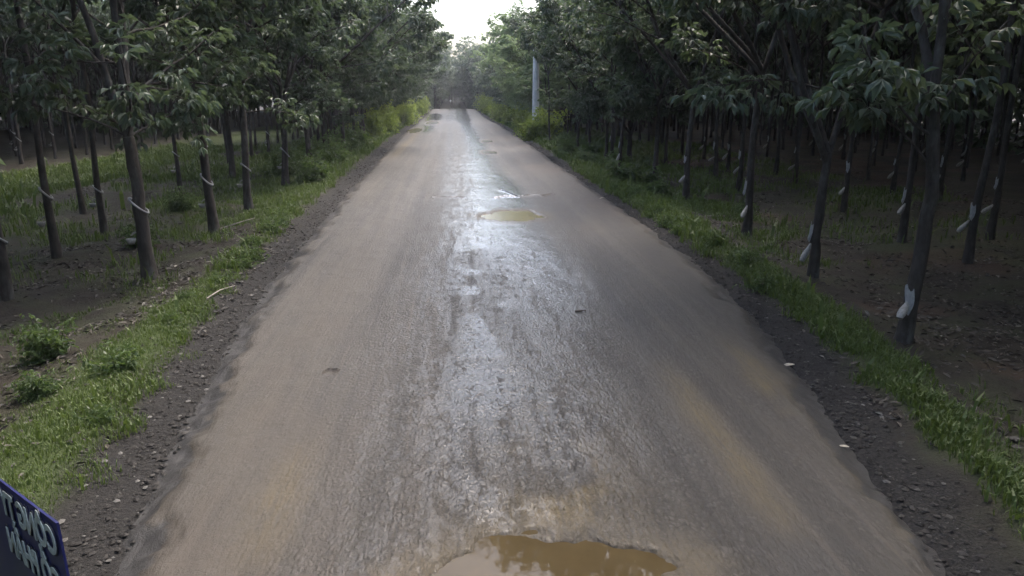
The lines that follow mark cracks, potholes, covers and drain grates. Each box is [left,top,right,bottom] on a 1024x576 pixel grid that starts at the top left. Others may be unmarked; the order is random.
pothole [318,367,343,377]
pothole [475,208,550,223]
pothole [381,514,713,576]
